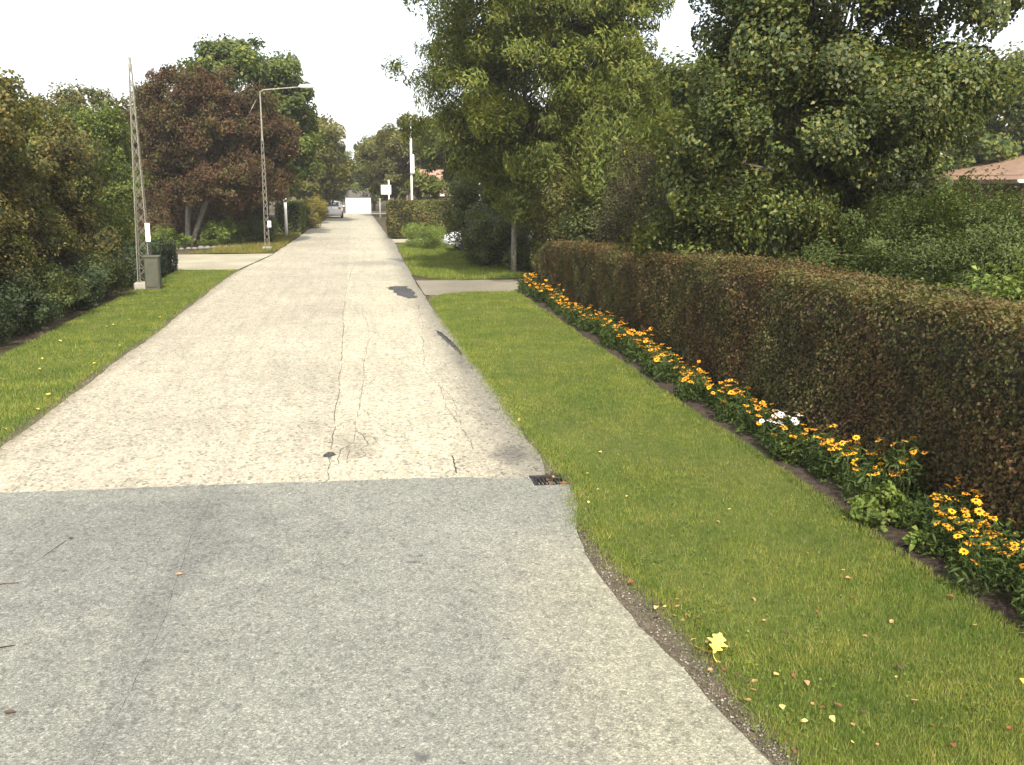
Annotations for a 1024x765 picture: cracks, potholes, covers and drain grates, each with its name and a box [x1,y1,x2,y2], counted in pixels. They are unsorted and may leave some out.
drain grate [529,474,569,486]
crack [327,284,377,480]
